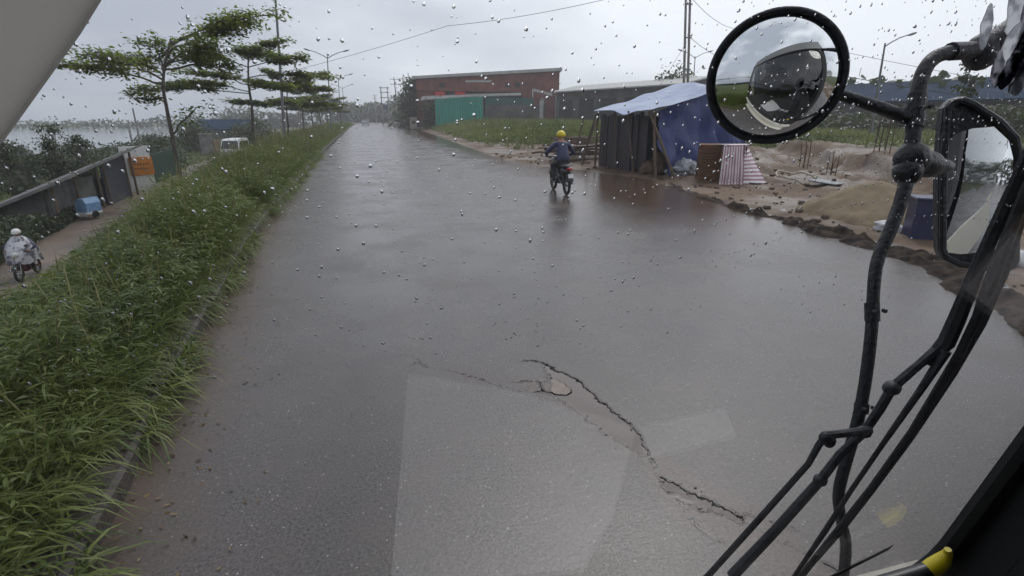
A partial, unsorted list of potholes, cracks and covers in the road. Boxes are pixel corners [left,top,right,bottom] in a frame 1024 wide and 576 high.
crack [410,353,550,394]
